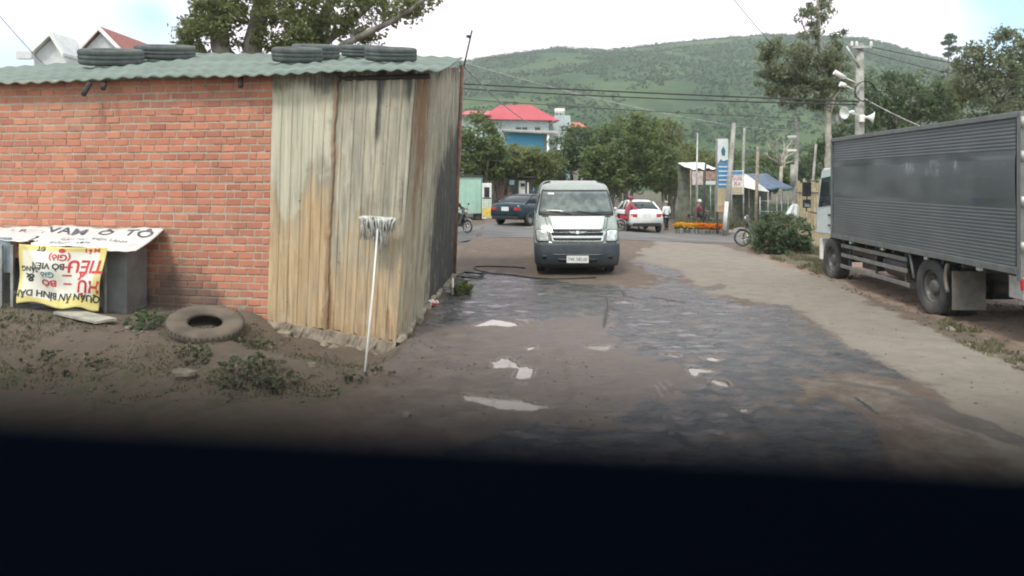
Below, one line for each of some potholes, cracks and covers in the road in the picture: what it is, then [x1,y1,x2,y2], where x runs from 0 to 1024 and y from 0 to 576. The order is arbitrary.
crack [602,290,685,327]
pothole [469,319,522,328]
crack [854,397,878,413]
pothole [487,356,539,380]
pothole [684,366,723,377]
pothole [579,343,616,352]
pothole [706,378,734,388]
